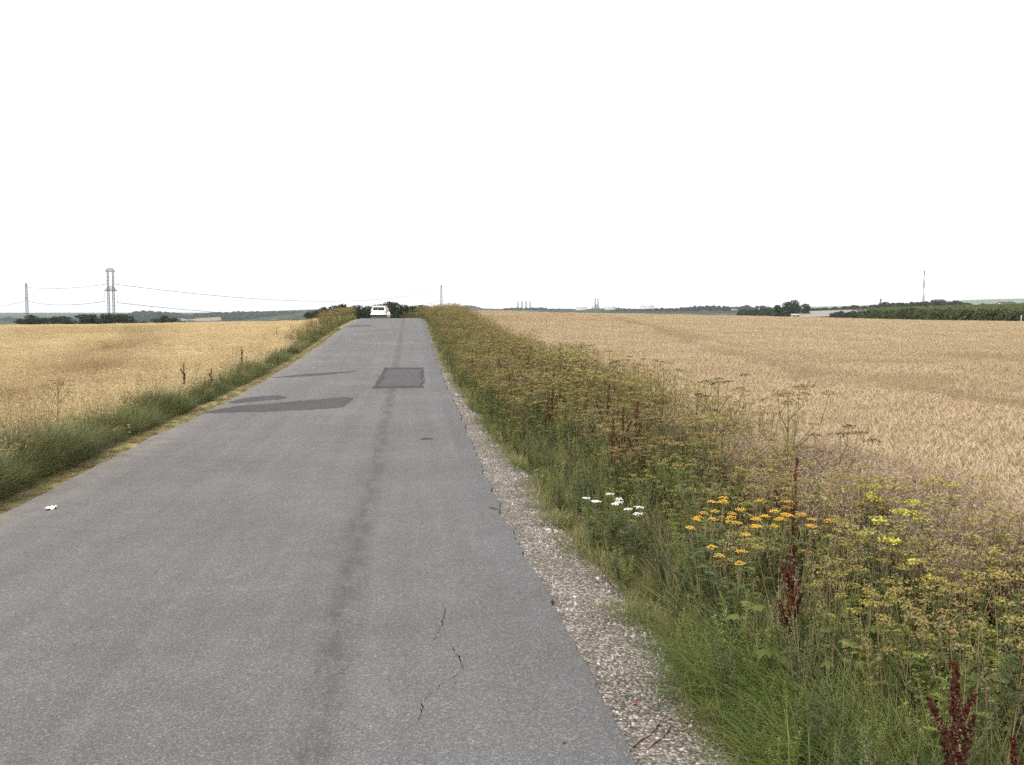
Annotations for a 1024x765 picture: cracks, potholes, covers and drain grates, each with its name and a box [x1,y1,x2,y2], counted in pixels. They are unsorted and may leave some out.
crack [416,607,463,724]
